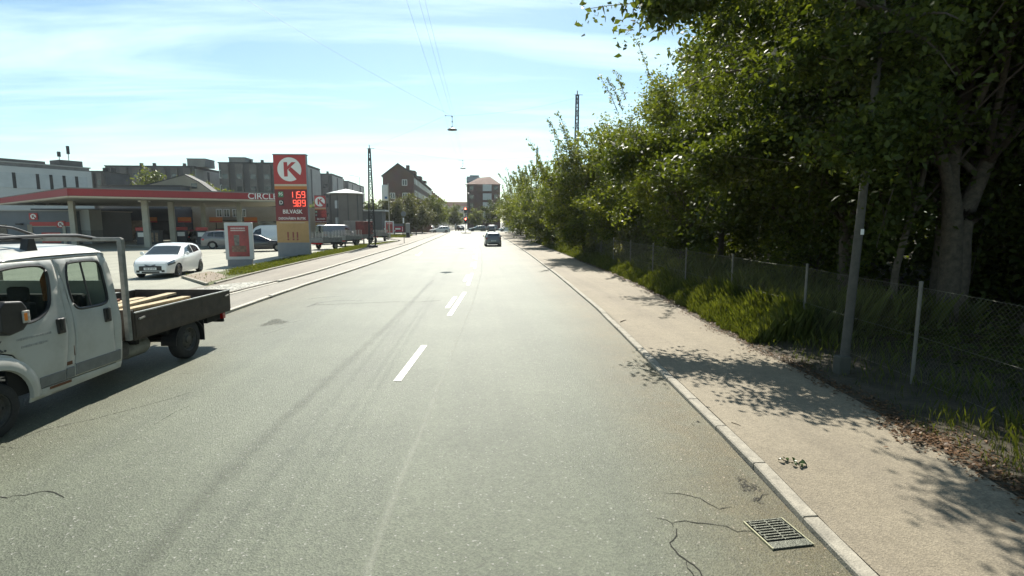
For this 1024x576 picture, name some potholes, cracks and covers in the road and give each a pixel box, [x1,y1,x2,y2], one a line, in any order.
drain grate [743,517,814,550]
crack [660,493,747,576]
